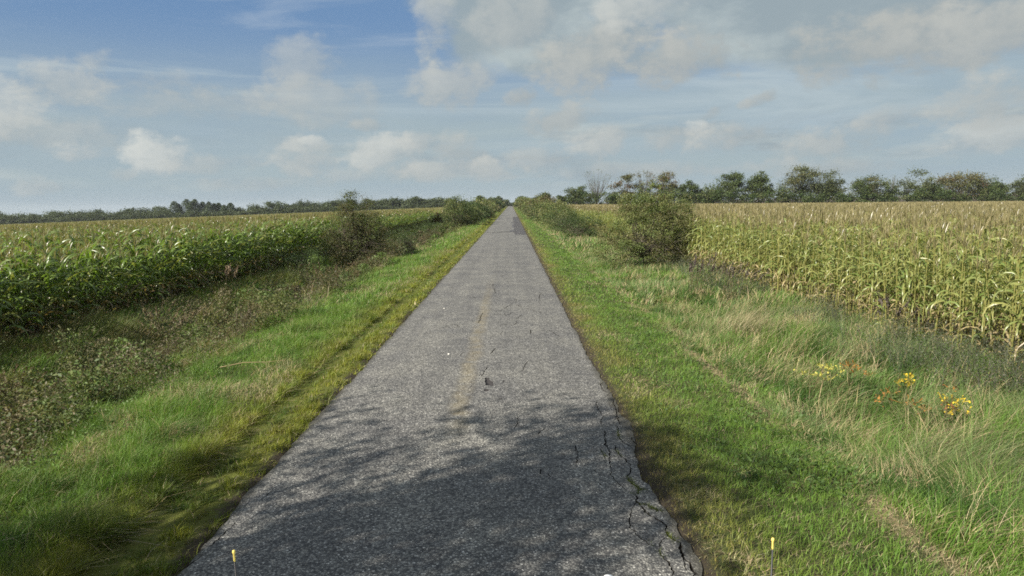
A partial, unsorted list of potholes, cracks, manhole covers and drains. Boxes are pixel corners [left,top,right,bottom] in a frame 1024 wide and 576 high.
crack [476,285,541,383]
crack [564,383,697,576]
